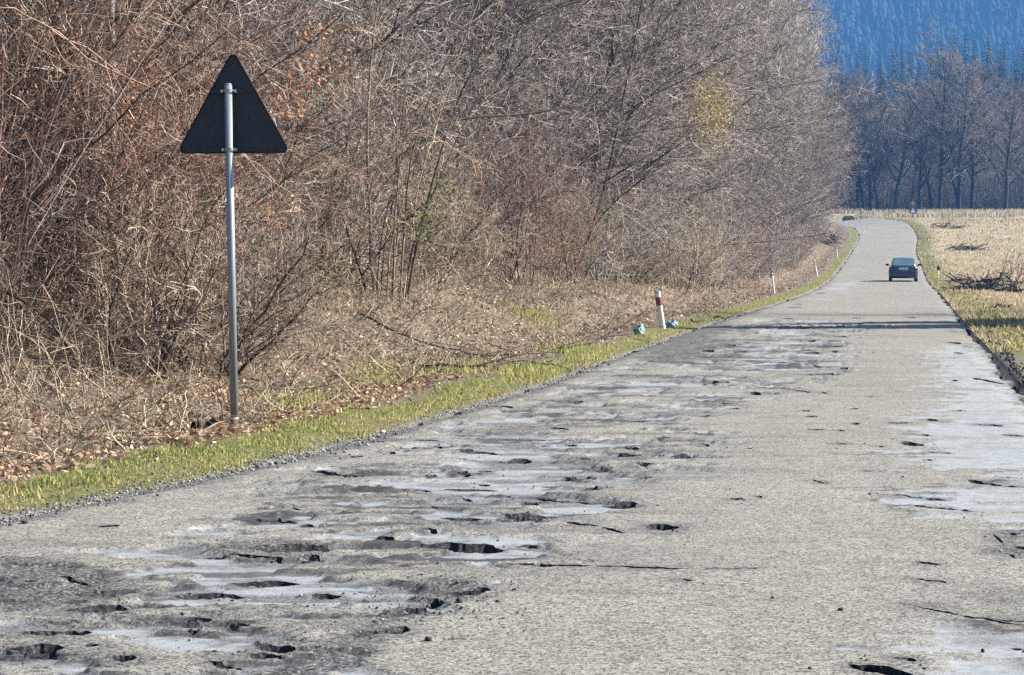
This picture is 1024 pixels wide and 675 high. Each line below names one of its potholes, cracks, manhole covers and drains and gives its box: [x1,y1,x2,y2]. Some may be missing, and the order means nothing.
pothole [260,645,296,653]
pothole [602,501,638,509]
pothole [417,540,506,554]
crack [507,542,689,569]
crack [898,602,1024,626]
pothole [443,587,491,597]
pothole [8,643,64,660]
pothole [496,511,558,523]
